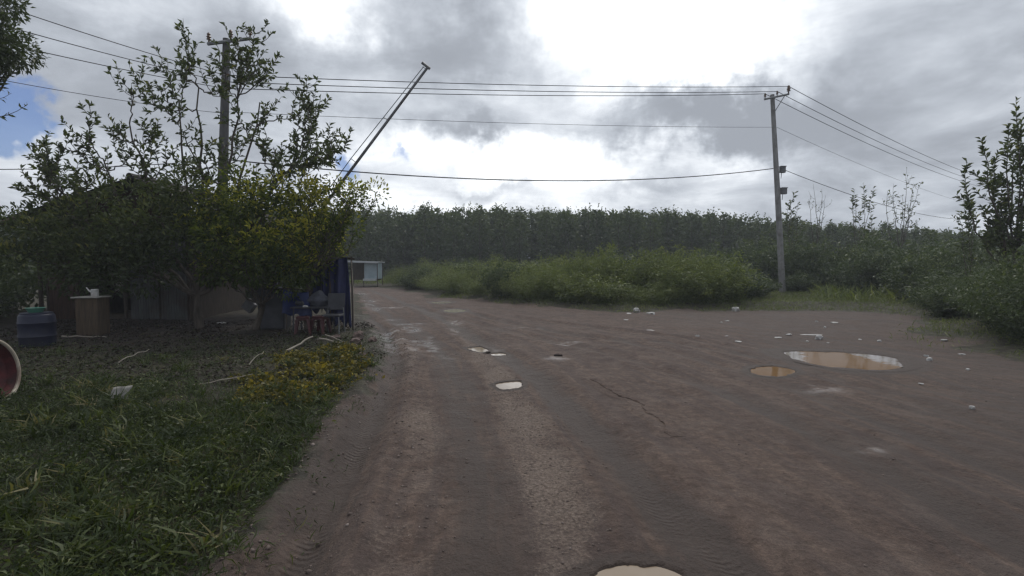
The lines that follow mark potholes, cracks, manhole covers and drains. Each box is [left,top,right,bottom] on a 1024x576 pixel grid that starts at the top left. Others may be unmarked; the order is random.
pothole [573,557,699,576]
pothole [745,365,801,377]
pothole [768,349,922,372]
crack [580,378,685,437]
pothole [491,380,526,390]
